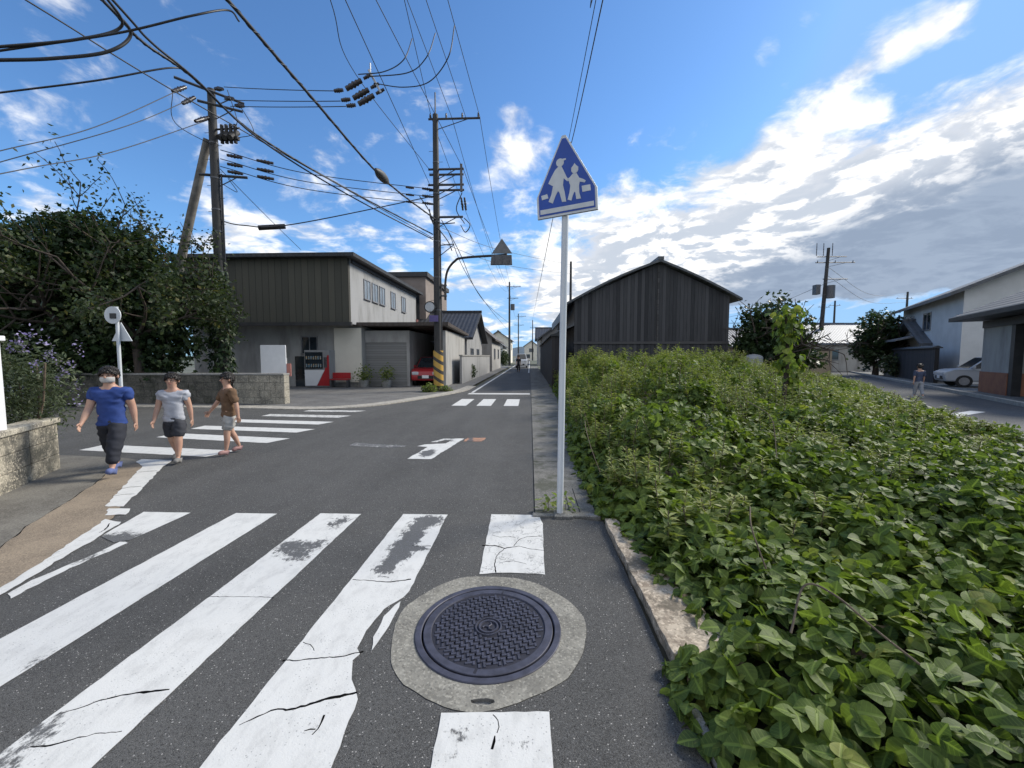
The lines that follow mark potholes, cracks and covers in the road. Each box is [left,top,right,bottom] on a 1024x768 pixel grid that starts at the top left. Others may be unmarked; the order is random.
crack [491,715,499,749]
crack [31,731,122,748]
crack [482,535,537,572]
crack [240,692,357,735]
manhole cover [391,576,586,712]
crack [282,642,364,661]
